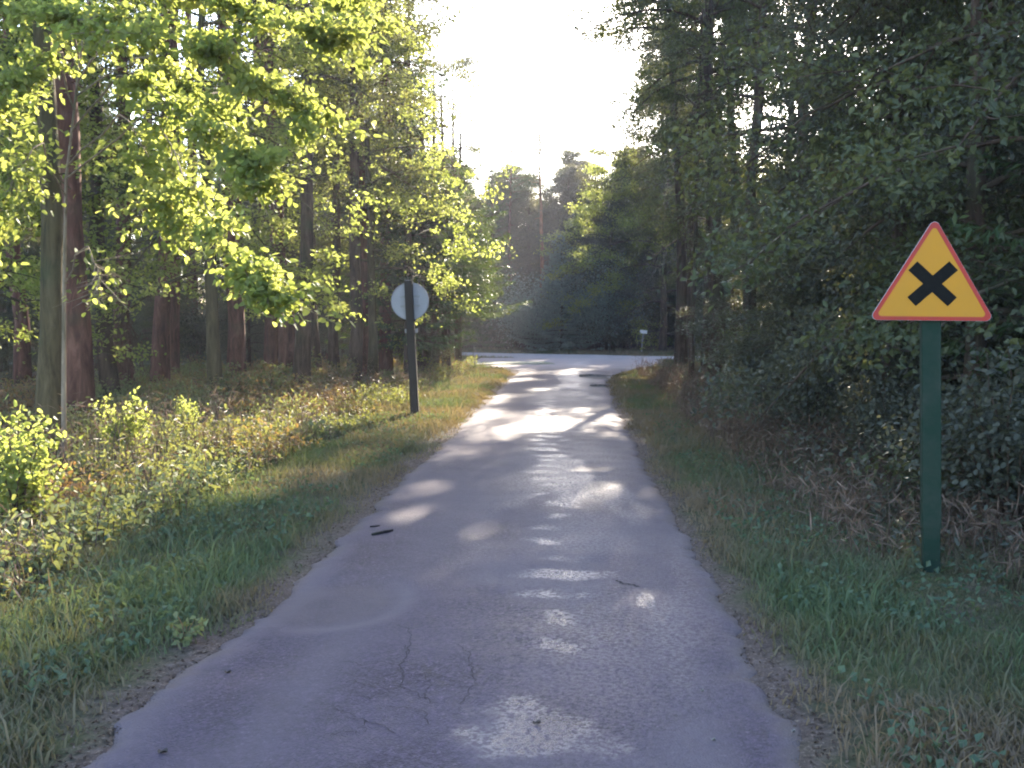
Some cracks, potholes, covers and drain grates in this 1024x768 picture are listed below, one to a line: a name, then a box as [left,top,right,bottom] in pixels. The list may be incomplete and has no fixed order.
crack [336,626,478,734]
